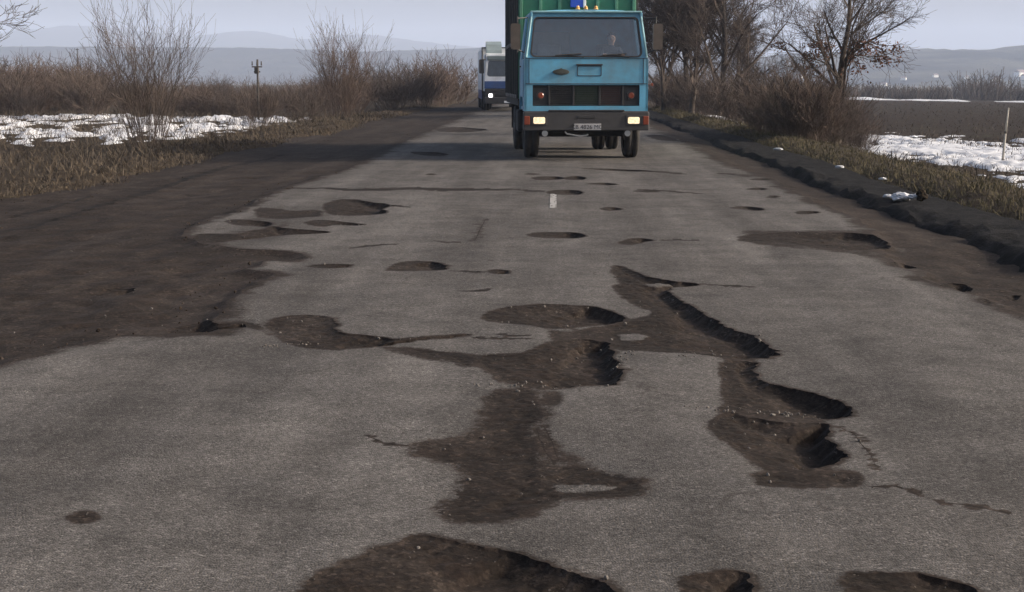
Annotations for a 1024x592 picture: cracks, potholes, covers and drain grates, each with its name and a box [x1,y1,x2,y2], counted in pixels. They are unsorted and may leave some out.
pothole [388,261,449,271]
pothole [324,199,390,216]
pothole [719,361,853,420]
pothole [72,514,96,523]
pothole [483,304,626,329]
crack [940,502,1008,514]
pothole [257,208,321,219]
pothole [683,570,755,592]
pothole [476,339,626,389]
pothole [165,320,246,333]
